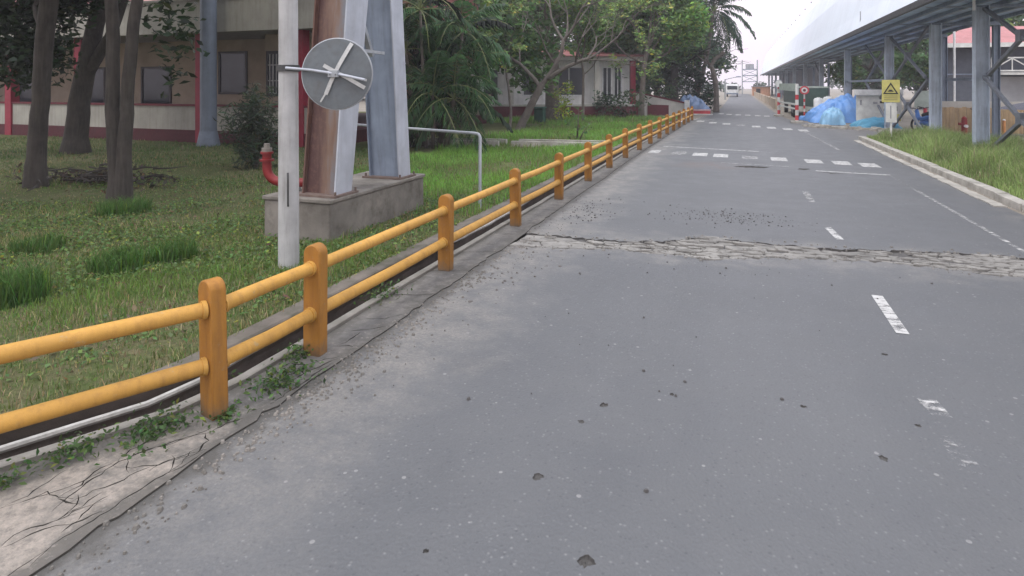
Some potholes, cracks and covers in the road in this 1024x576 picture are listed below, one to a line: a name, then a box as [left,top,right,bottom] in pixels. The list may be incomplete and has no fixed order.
crack [5,418,242,576]
pothole [577,554,596,568]
